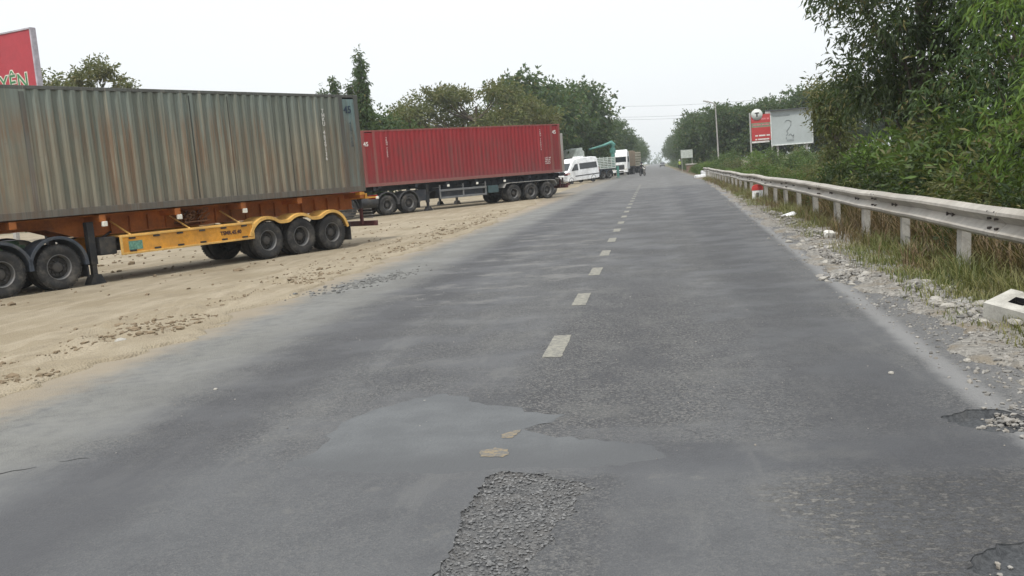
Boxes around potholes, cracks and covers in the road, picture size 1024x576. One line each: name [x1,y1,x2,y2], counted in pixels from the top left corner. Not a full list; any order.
pothole [941,402,1024,439]
pothole [966,542,1024,576]
